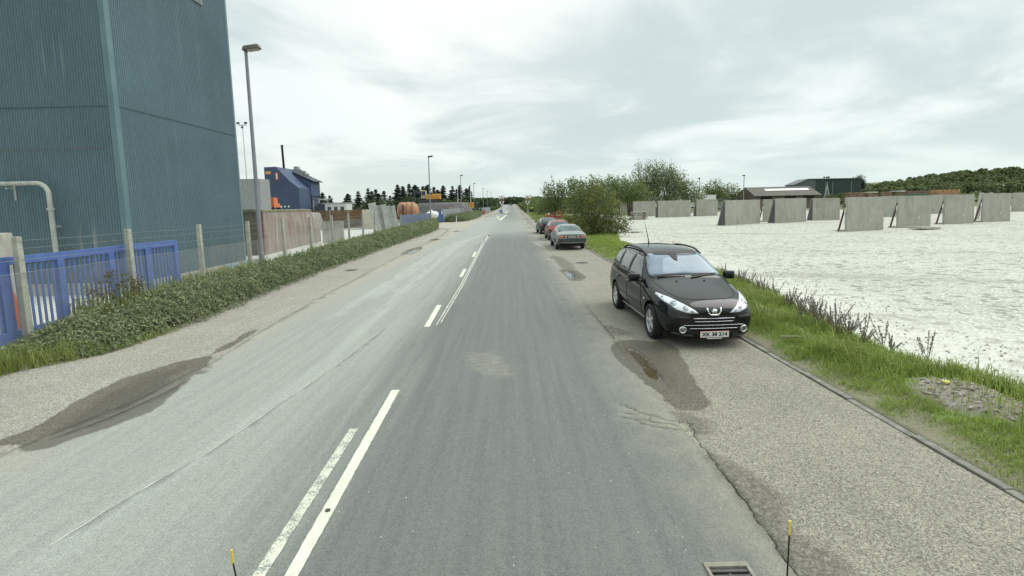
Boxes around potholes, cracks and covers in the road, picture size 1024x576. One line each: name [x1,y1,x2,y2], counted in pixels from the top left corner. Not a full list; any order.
drain grate [703,561,756,576]
crack [623,413,799,576]
pothole [626,347,662,381]
